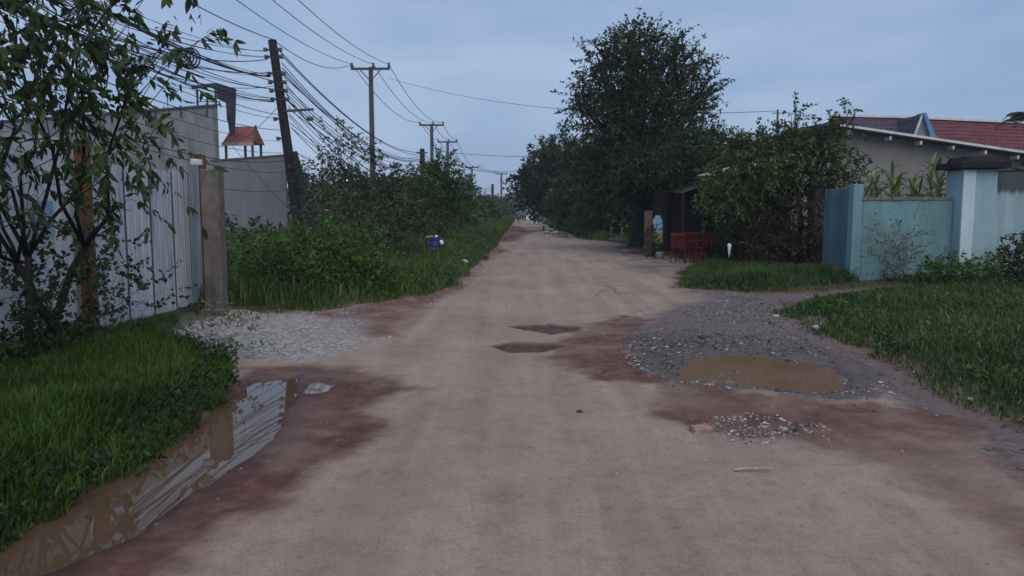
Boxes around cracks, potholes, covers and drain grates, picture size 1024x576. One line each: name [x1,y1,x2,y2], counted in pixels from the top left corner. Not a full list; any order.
crack [550,277,645,319]
pothole [618,329,902,400]
pothole [488,340,571,353]
pothole [503,322,588,335]
pothole [708,414,824,440]
